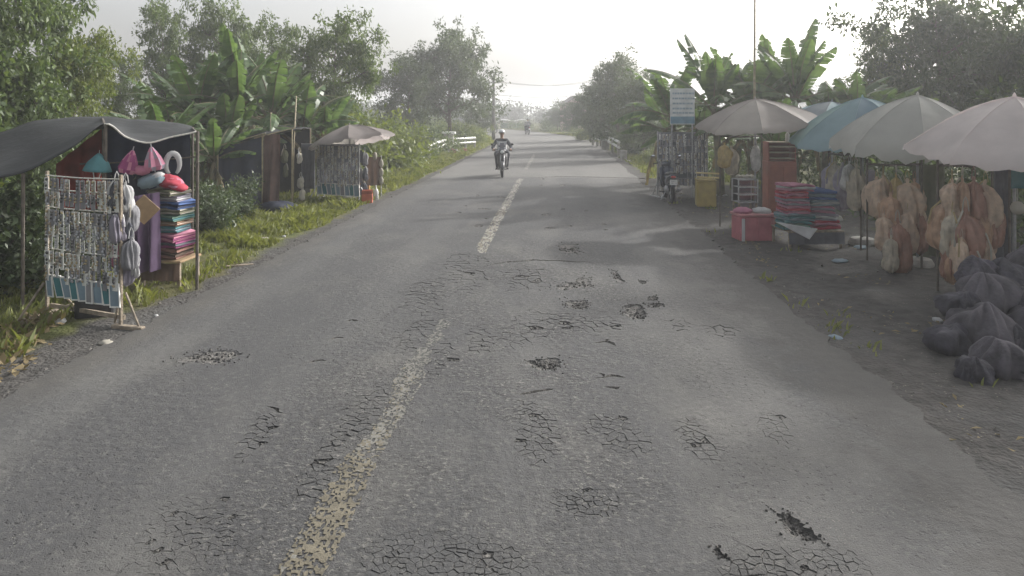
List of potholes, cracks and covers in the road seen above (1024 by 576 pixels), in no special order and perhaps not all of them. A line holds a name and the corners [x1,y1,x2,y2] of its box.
crack [392,252,634,382]
pothole [524,355,566,374]
crack [709,543,876,576]
pothole [620,302,650,321]
pothole [162,346,250,367]
crack [117,383,730,576]
pothole [559,296,591,310]
crack [752,409,800,450]
pothole [765,505,831,549]
